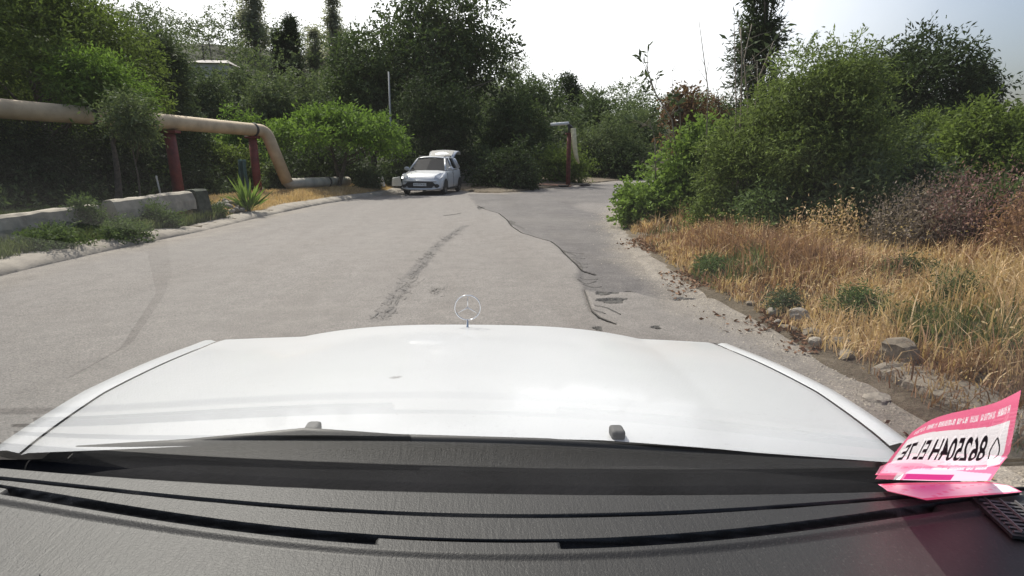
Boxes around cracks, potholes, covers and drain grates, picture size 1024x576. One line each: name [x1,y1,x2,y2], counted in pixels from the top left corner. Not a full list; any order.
crack [477,205,621,325]
